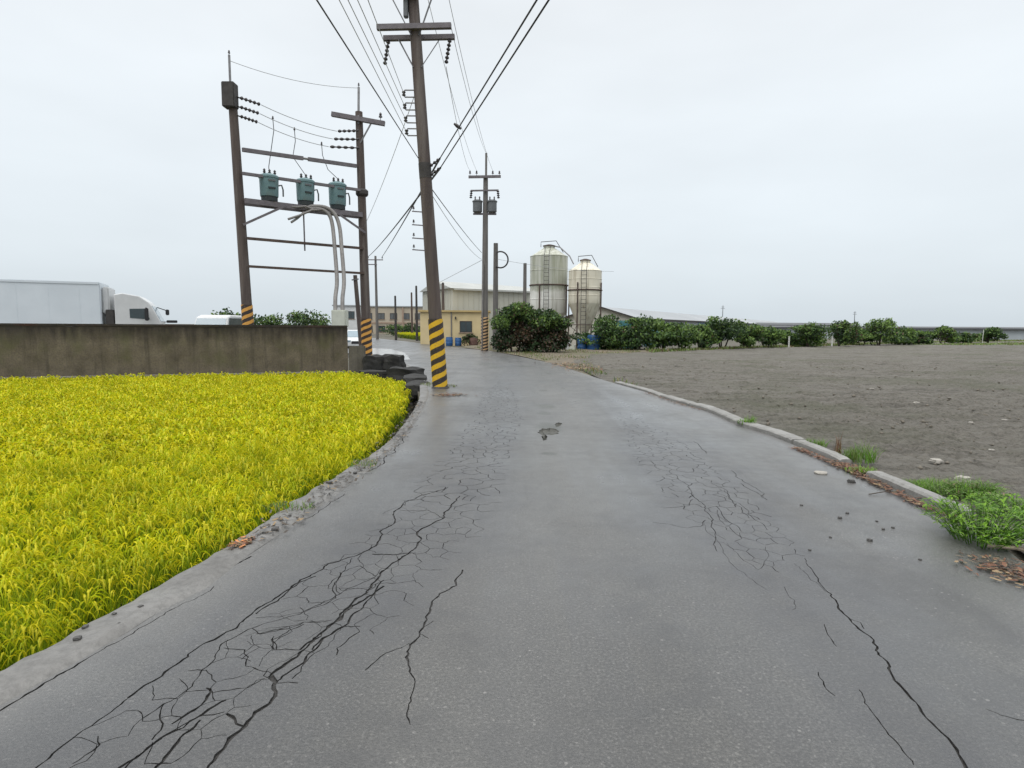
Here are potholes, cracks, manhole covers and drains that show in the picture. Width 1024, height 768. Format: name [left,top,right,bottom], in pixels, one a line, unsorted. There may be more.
pothole [538,428,559,441]
crack [0,388,524,768]
crack [620,413,826,610]
crack [804,558,968,768]
